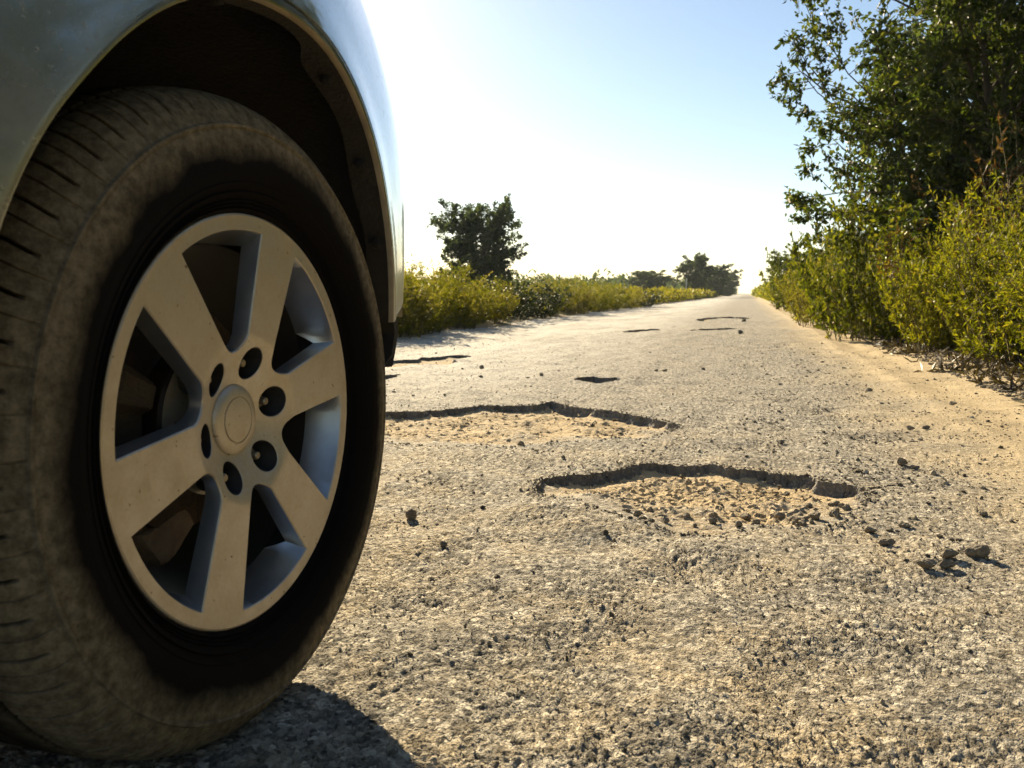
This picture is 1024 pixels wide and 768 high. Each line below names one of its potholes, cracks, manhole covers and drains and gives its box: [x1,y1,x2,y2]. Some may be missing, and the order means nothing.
pothole [533,463,866,536]
pothole [387,355,471,368]
pothole [384,401,683,447]
pothole [574,376,620,384]
